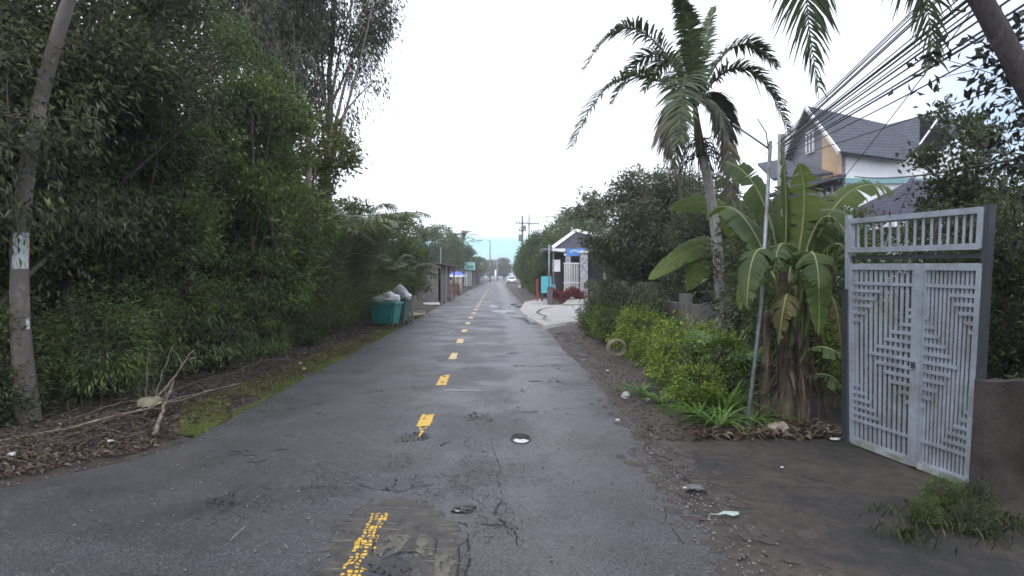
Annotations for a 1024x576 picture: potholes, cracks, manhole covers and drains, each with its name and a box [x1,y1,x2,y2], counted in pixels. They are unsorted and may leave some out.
pothole [451,504,477,513]
pothole [393,431,431,442]
crack [198,434,293,466]
crack [415,353,614,576]
manhole cover [510,433,531,444]
